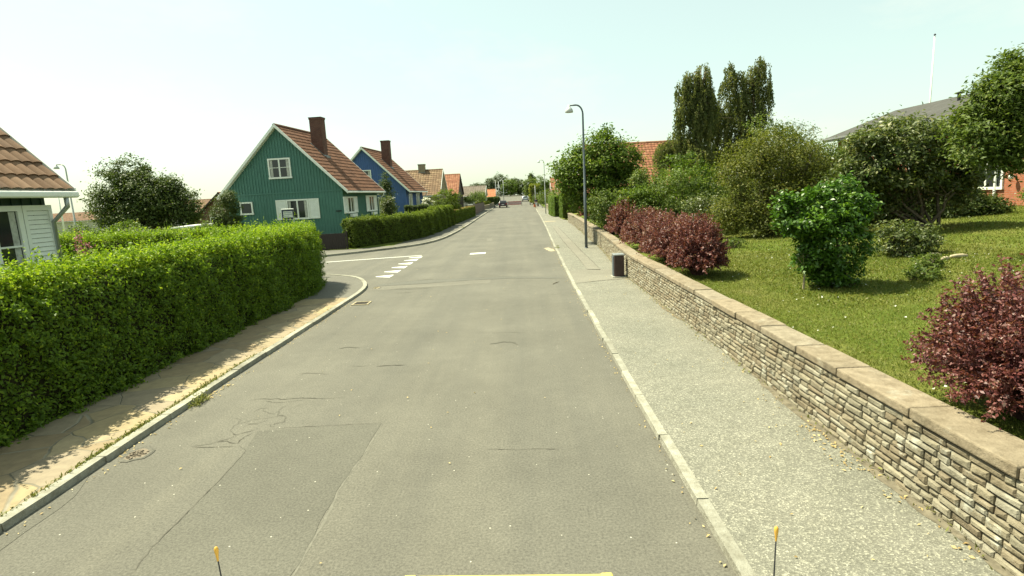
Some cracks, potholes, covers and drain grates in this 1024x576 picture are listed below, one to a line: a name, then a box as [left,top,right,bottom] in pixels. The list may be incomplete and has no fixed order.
crack [190,397,342,447]
